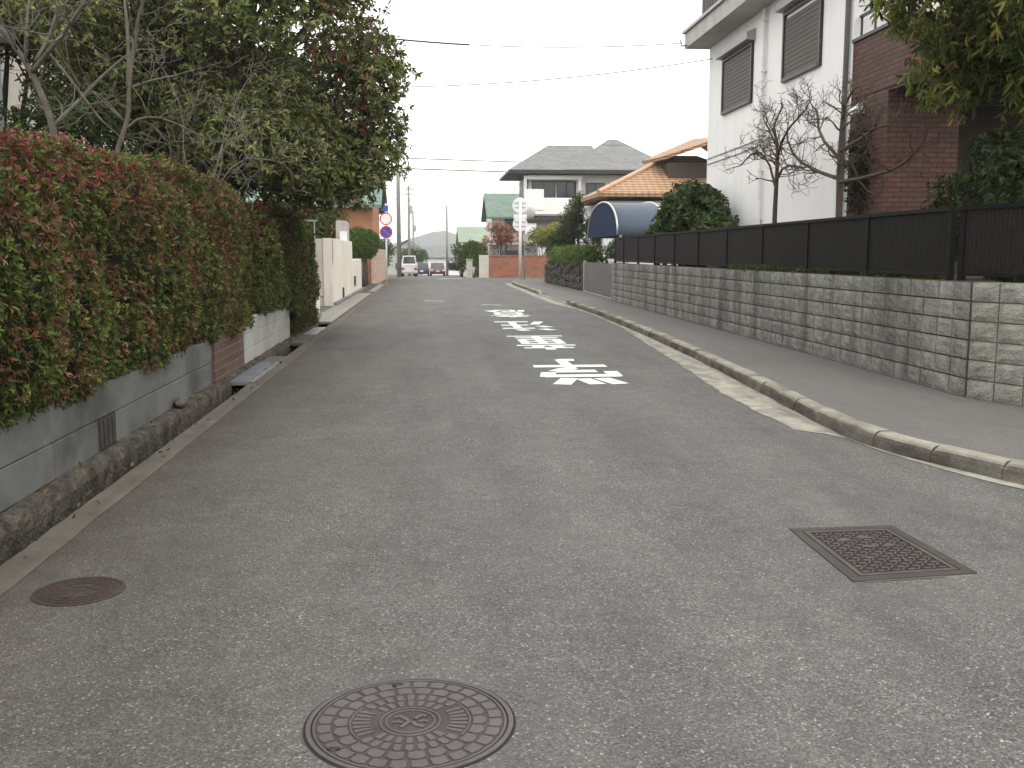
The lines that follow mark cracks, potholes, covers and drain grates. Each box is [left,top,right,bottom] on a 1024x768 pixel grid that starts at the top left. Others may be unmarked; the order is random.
manhole cover [30,576,126,607]
manhole cover [303,677,516,768]
manhole cover [789,525,977,582]
